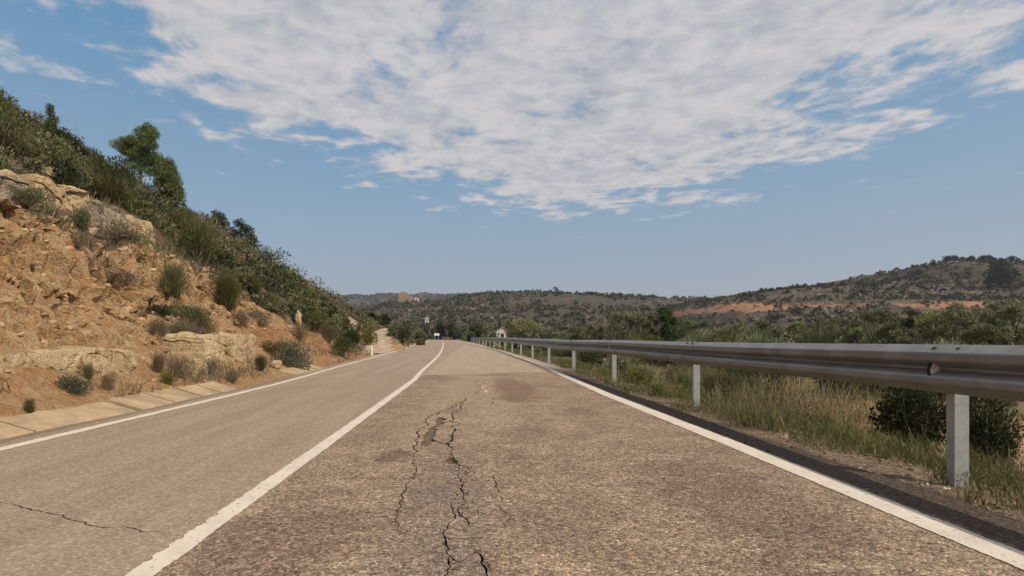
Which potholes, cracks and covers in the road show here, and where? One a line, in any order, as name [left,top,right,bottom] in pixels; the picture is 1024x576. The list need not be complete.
crack [0,502,170,555]
crack [382,382,511,576]
